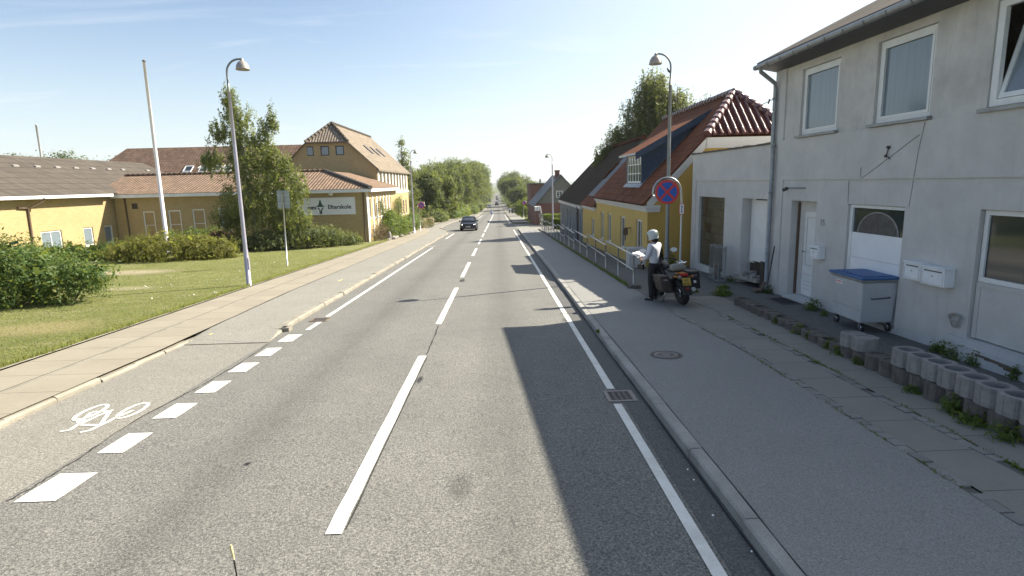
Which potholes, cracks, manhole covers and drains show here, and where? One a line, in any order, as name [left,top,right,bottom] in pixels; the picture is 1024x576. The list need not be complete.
manhole cover [650,351,683,359]
drain grate [603,390,638,402]
